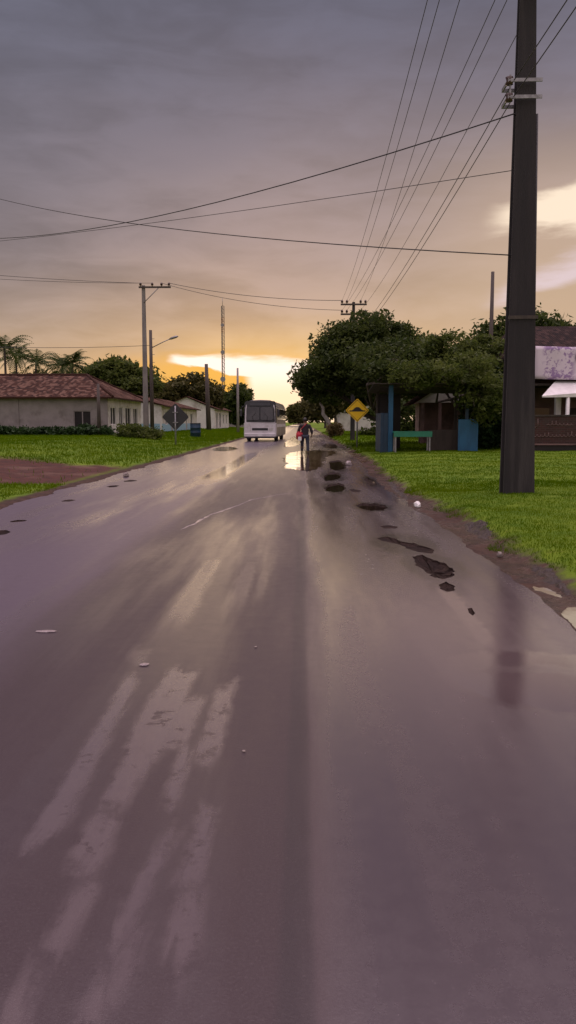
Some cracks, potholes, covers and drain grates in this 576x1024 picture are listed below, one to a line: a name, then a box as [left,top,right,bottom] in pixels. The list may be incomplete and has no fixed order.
pothole [377,537,434,554]
pothole [357,503,388,511]
pothole [324,483,346,492]
pothole [329,460,346,471]
pothole [439,582,455,592]
pothole [324,473,341,481]
pothole [413,555,455,579]
